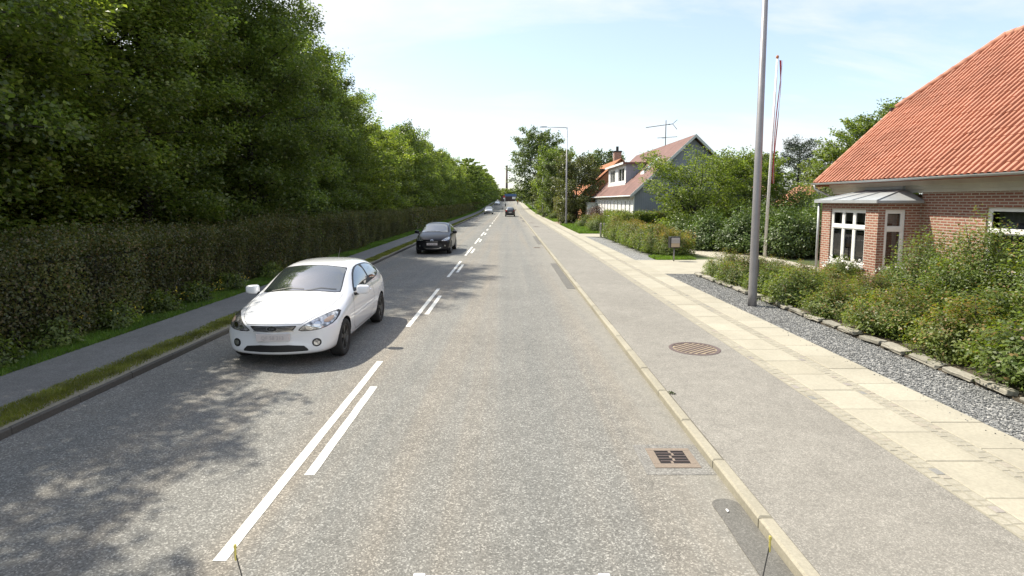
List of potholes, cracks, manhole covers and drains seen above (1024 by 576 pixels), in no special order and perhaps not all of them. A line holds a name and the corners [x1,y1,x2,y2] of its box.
drain grate [632,445,717,475]
manhole cover [669,342,721,356]
